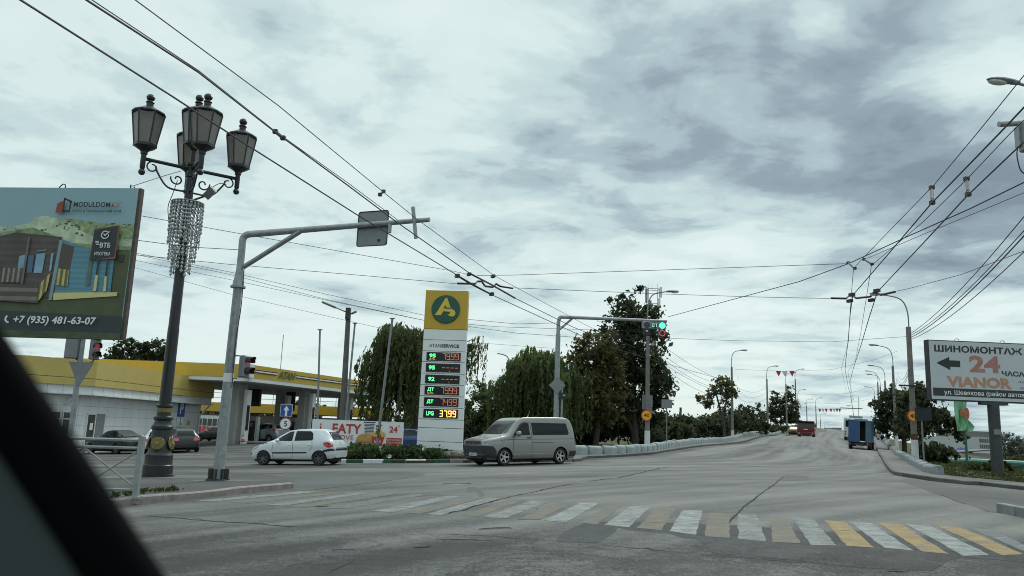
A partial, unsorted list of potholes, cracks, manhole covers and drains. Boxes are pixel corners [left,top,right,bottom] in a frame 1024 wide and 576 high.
crack [729,476,813,523]
